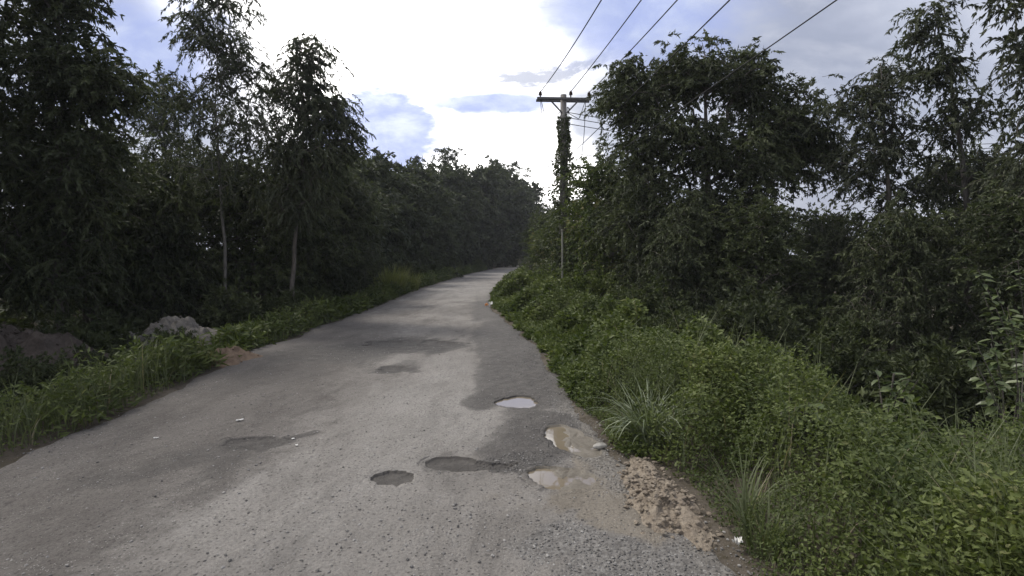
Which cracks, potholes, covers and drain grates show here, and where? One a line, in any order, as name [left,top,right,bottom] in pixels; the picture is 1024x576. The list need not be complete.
pothole [520,464,605,496]
pothole [362,468,422,490]
pothole [538,423,609,461]
pothole [368,339,466,348]
pothole [373,365,414,374]
pothole [489,394,544,410]
pothole [215,435,289,449]
pothole [419,455,522,476]
